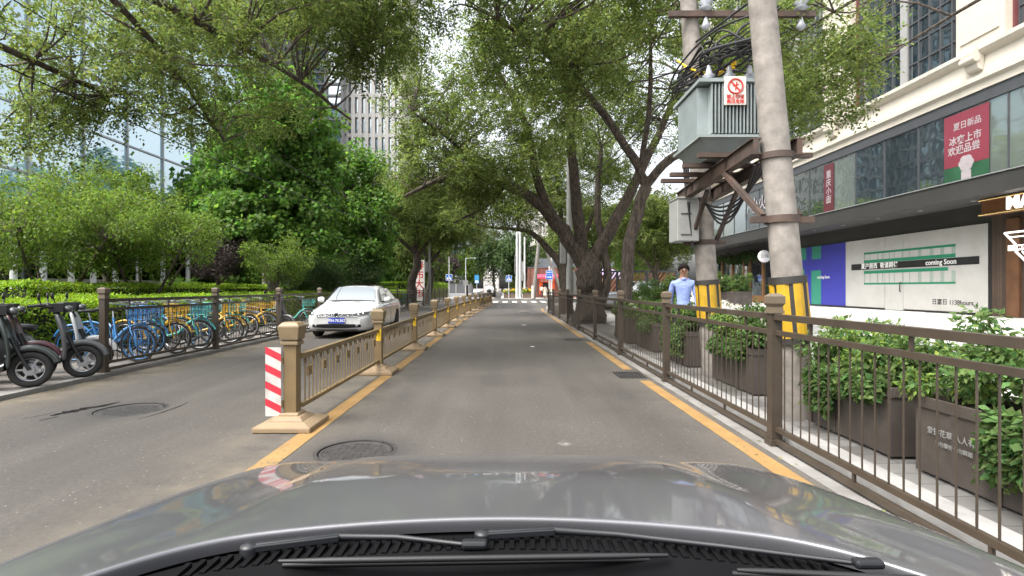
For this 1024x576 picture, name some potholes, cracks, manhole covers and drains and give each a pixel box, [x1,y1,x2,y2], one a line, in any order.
manhole cover [88,402,169,417]
manhole cover [312,439,398,461]
crack [24,402,119,421]
